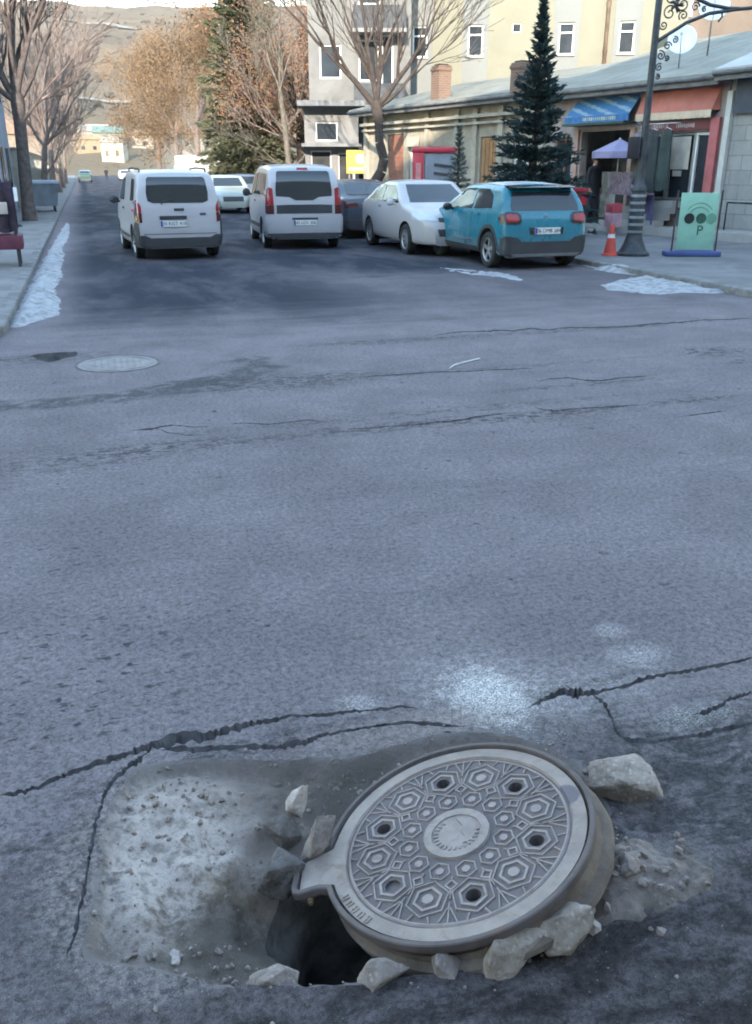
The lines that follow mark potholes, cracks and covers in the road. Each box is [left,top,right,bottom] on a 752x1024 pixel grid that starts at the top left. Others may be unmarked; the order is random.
crack [358,368,645,382]
crack [526,657,752,745]
manhole cover [75,355,161,373]
manhole cover [291,742,615,975]
crack [2,705,466,960]
crack [351,413,507,430]
crack [433,318,745,336]
crack [138,425,206,436]
